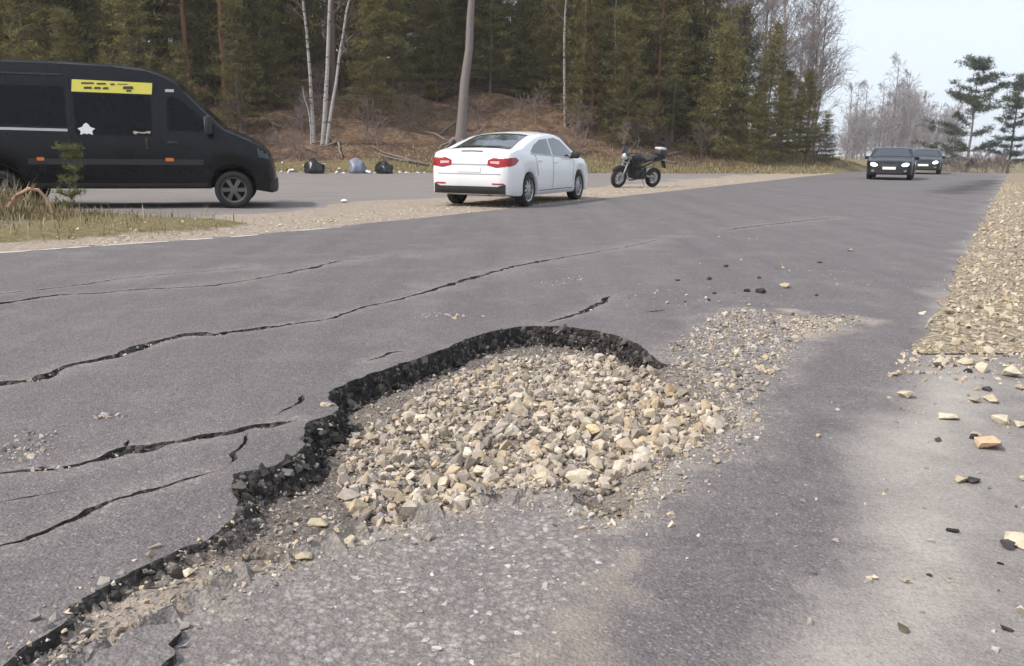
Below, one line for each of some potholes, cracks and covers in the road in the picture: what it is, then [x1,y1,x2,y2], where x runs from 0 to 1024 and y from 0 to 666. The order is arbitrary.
pothole [3,324,738,666]
crack [0,237,668,546]
